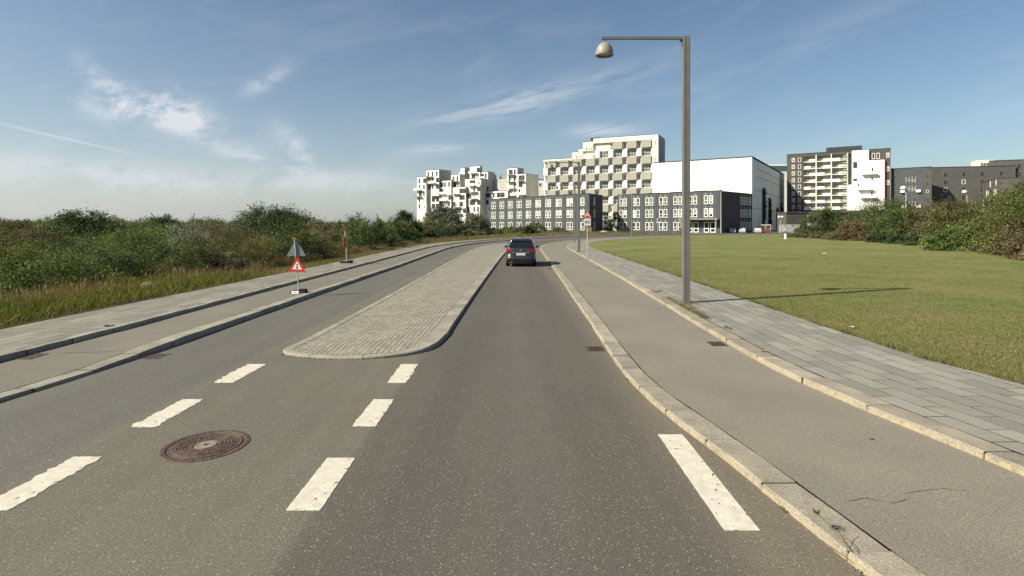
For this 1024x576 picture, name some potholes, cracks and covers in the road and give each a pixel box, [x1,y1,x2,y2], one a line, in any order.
manhole cover [158,430,250,463]
